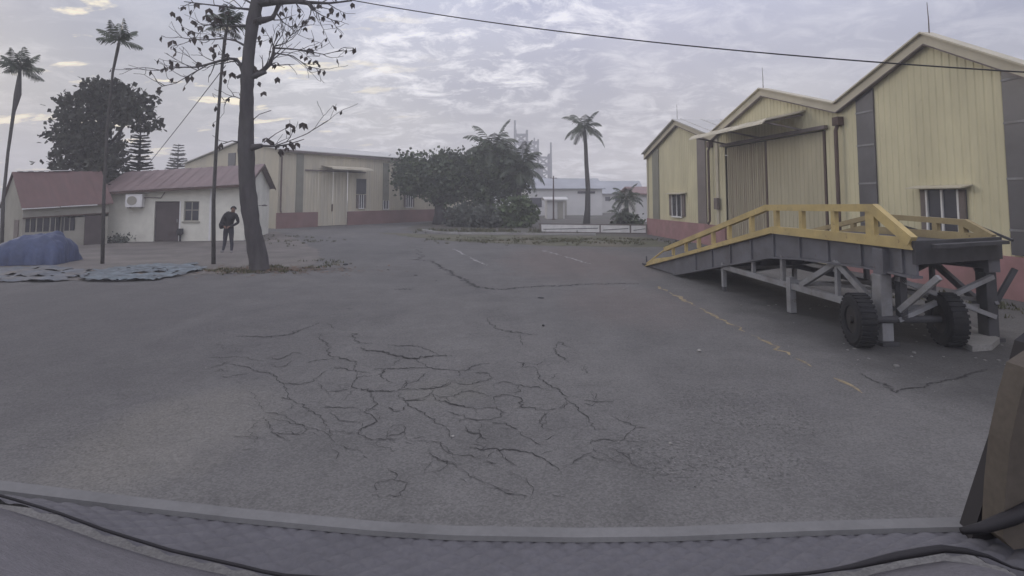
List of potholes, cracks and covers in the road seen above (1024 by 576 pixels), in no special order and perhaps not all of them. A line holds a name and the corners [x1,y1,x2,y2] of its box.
crack [861,369,983,393]
crack [412,247,636,290]
crack [570,416,645,468]
crack [211,333,612,498]
